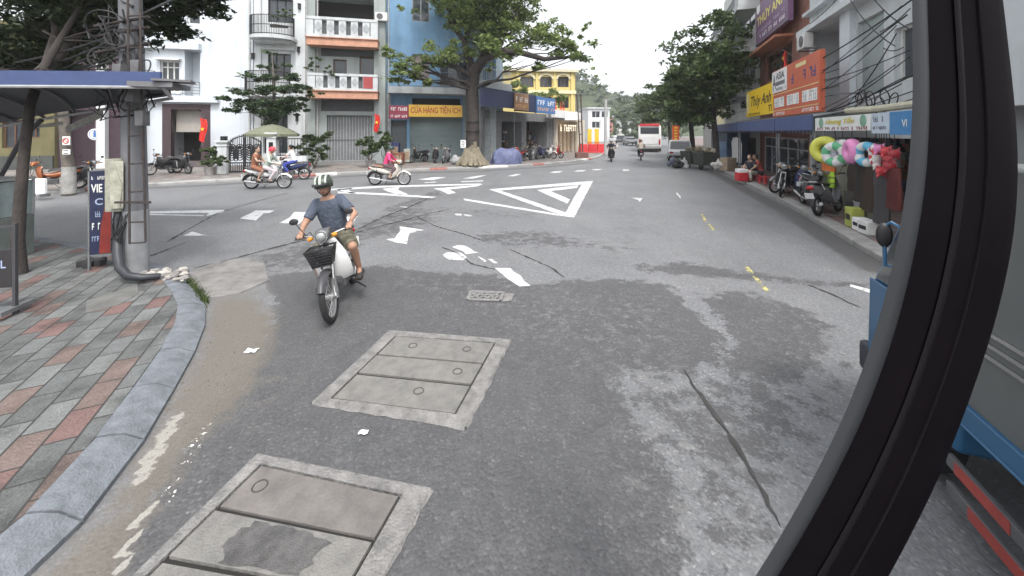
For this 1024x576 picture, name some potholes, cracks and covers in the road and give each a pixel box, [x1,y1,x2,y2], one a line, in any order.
crack [195,240,305,268]
manhole cover [310,330,512,431]
crack [150,193,286,256]
crack [808,284,859,307]
manhole cover [132,453,433,576]
